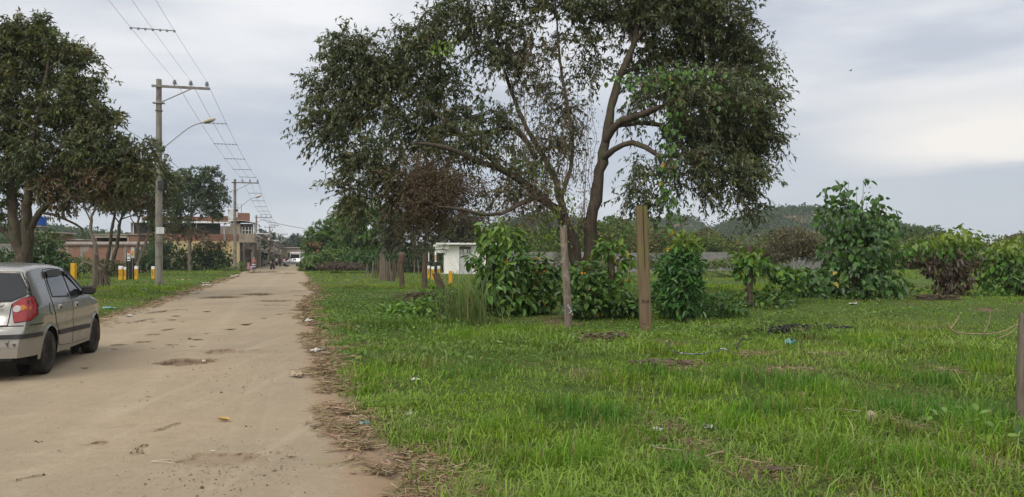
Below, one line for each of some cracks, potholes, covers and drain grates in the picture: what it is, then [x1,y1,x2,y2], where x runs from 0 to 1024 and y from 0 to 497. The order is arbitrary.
pothole [168,452,269,466]
pothole [149,358,222,367]
